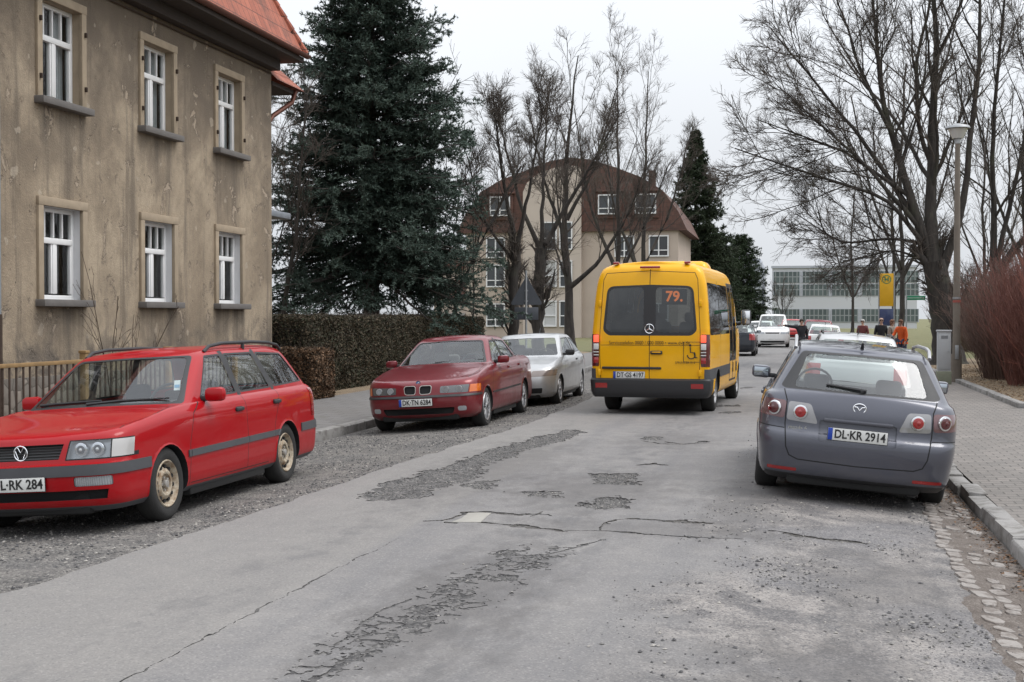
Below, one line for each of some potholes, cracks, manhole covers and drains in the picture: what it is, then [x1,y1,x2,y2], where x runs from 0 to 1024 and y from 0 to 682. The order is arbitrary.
pothole [575,496,636,510]
pothole [588,473,644,485]
crack [120,511,738,682]
crack [768,530,868,544]
pothole [356,430,587,501]
